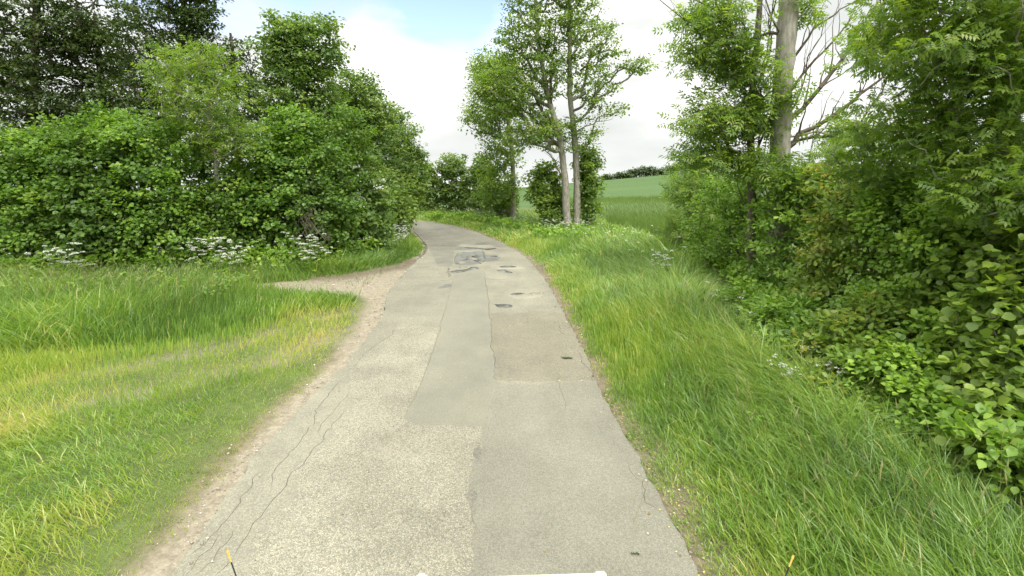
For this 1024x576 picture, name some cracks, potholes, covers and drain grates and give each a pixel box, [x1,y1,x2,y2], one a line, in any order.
crack [190,325,397,575]
pothole [454,251,486,265]
